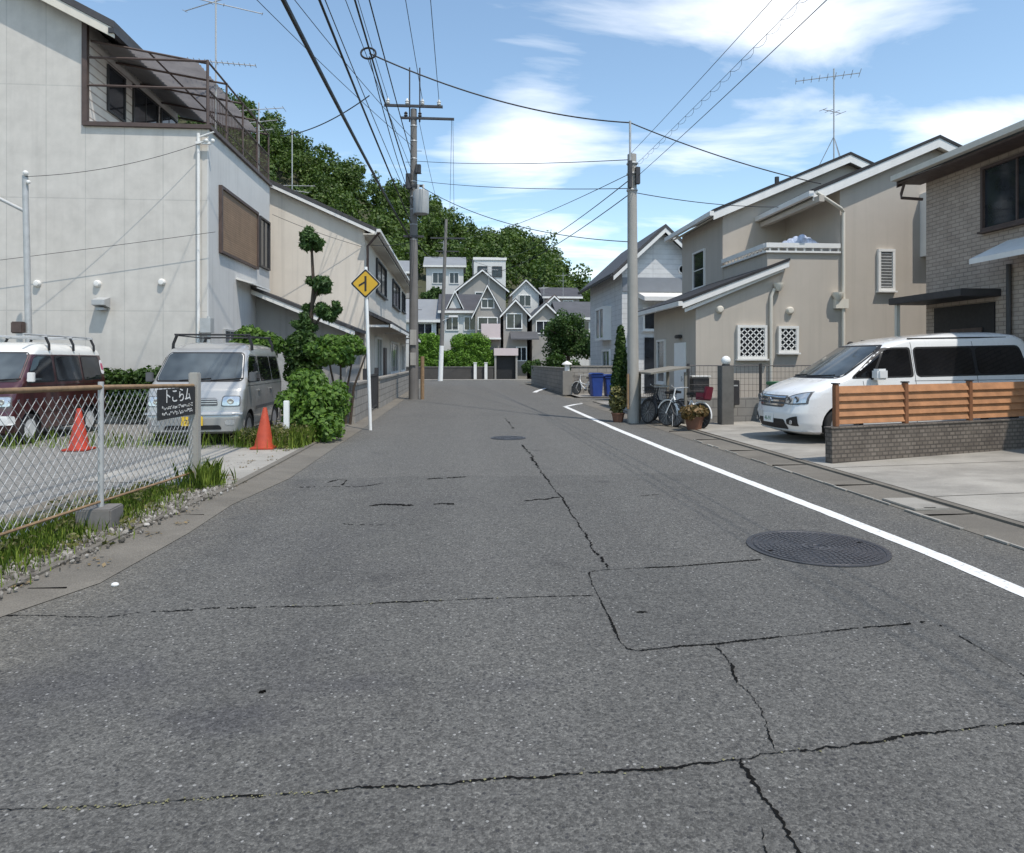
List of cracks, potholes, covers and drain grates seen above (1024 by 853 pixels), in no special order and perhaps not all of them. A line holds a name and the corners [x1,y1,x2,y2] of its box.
crack [1,647,1024,853]
crack [314,479,412,506]
crack [6,595,591,617]
manhole cover [746,530,892,568]
